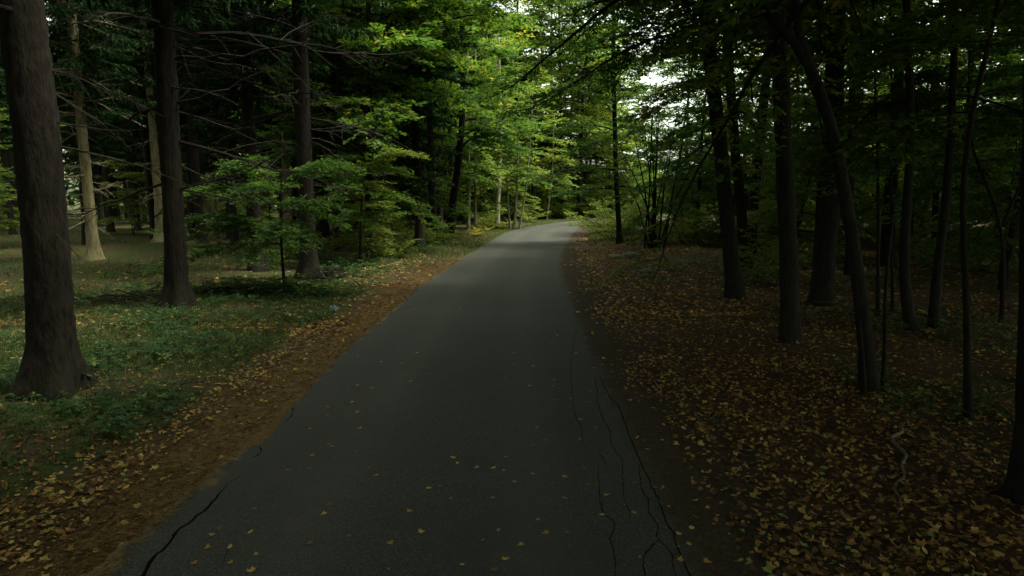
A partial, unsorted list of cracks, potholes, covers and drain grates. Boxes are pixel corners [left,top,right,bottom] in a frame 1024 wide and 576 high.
crack [141,446,262,576]
crack [570,334,691,576]
